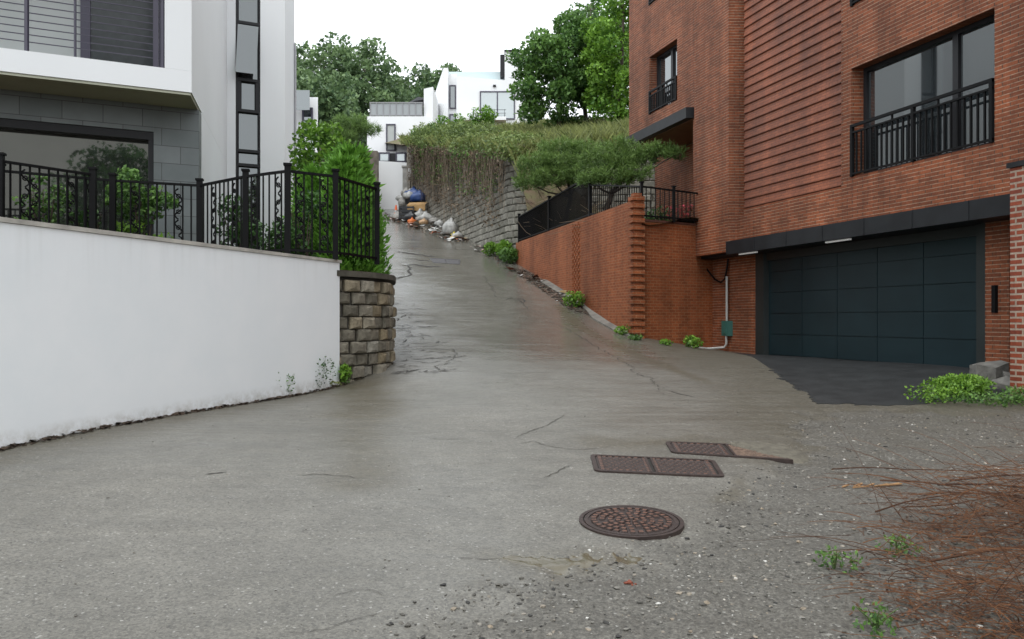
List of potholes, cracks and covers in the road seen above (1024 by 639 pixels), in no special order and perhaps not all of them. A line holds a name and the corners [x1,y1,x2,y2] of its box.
crack [484,276,688,400]
crack [392,303,466,374]
manhole cover [590,454,724,478]
manhole cover [579,505,684,541]
manhole cover [666,441,793,464]
crack [395,251,442,279]
